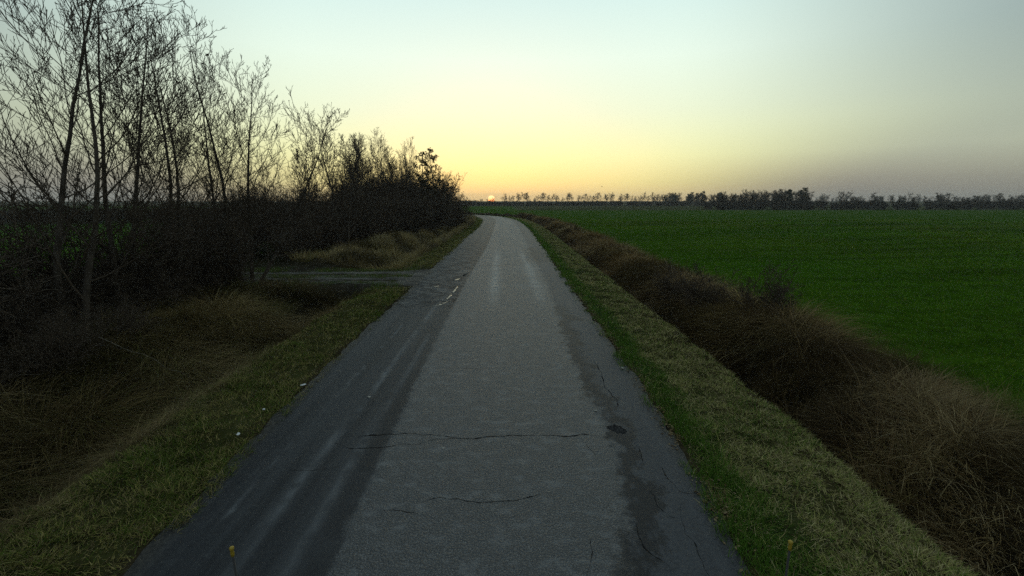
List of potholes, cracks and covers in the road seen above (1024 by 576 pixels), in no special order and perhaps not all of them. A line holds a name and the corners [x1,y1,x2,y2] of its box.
crack [430,494,541,503]
crack [632,447,709,575]
crack [294,433,595,471]
